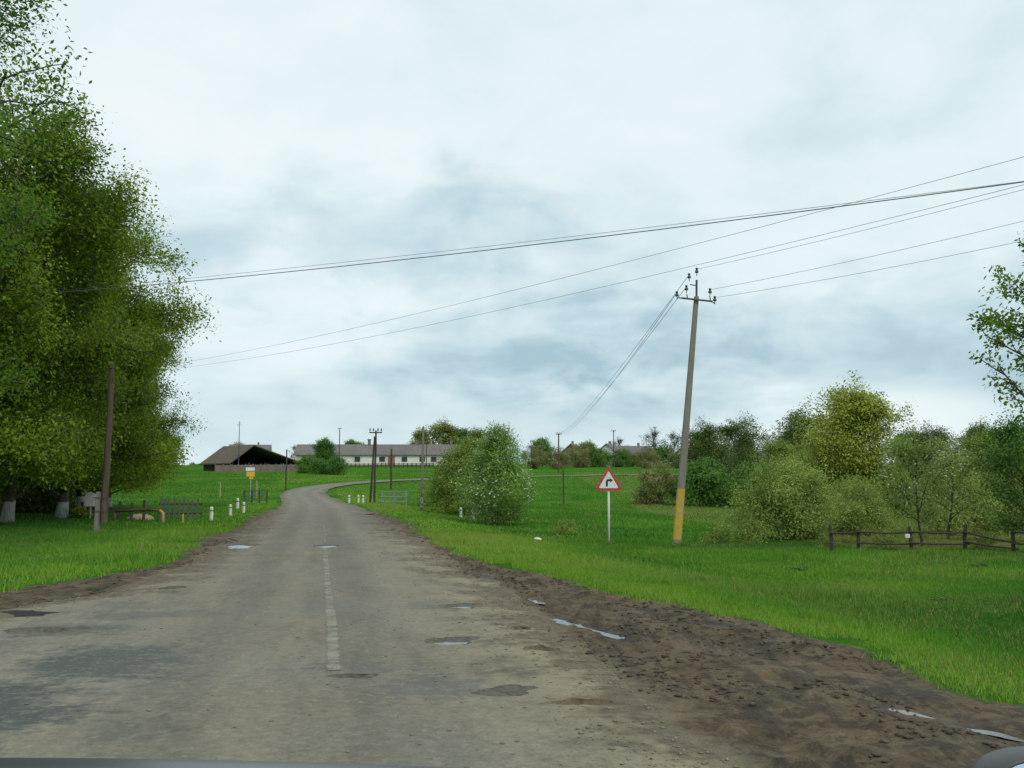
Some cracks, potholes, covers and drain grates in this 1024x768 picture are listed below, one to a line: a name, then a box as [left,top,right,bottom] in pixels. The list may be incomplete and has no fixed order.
pothole [550,698,625,706]
pothole [424,636,481,645]
pothole [470,684,539,697]
